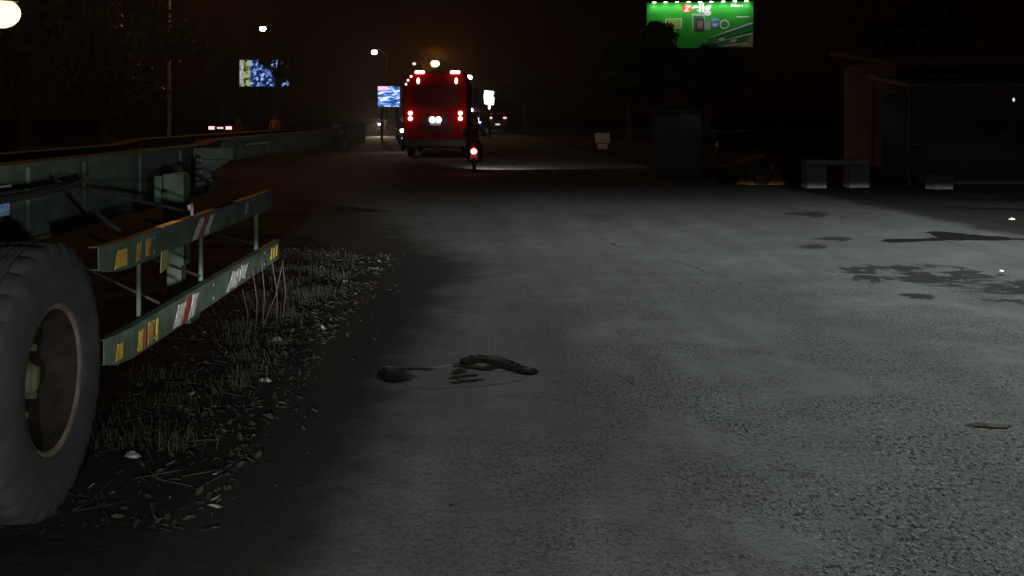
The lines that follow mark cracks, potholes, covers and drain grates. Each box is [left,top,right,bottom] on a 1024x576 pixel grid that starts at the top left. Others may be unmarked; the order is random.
pothole [376,354,540,390]
crack [558,220,829,300]
